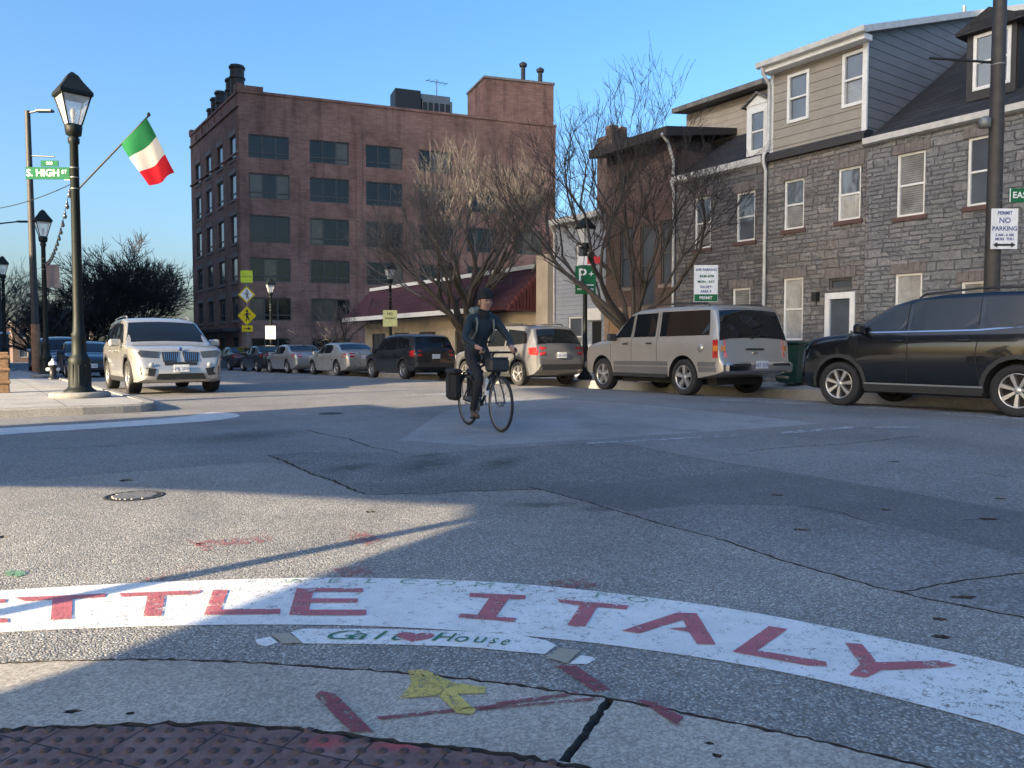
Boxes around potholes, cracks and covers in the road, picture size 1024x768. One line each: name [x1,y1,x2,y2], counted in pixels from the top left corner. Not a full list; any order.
manhole cover [103,490,165,502]
